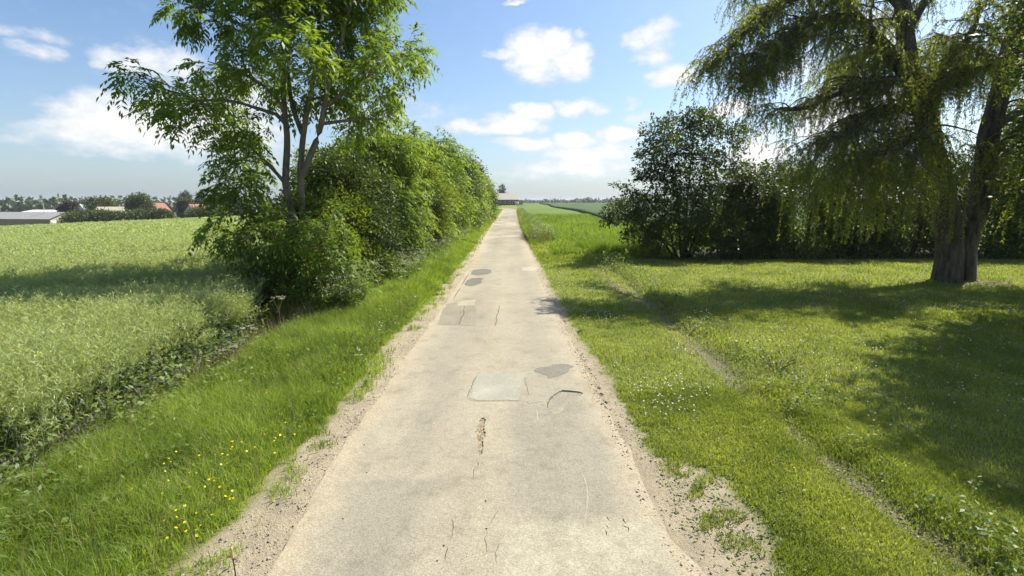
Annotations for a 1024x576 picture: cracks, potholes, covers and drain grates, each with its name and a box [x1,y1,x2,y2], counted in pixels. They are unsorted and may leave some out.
crack [473,418,486,479]
